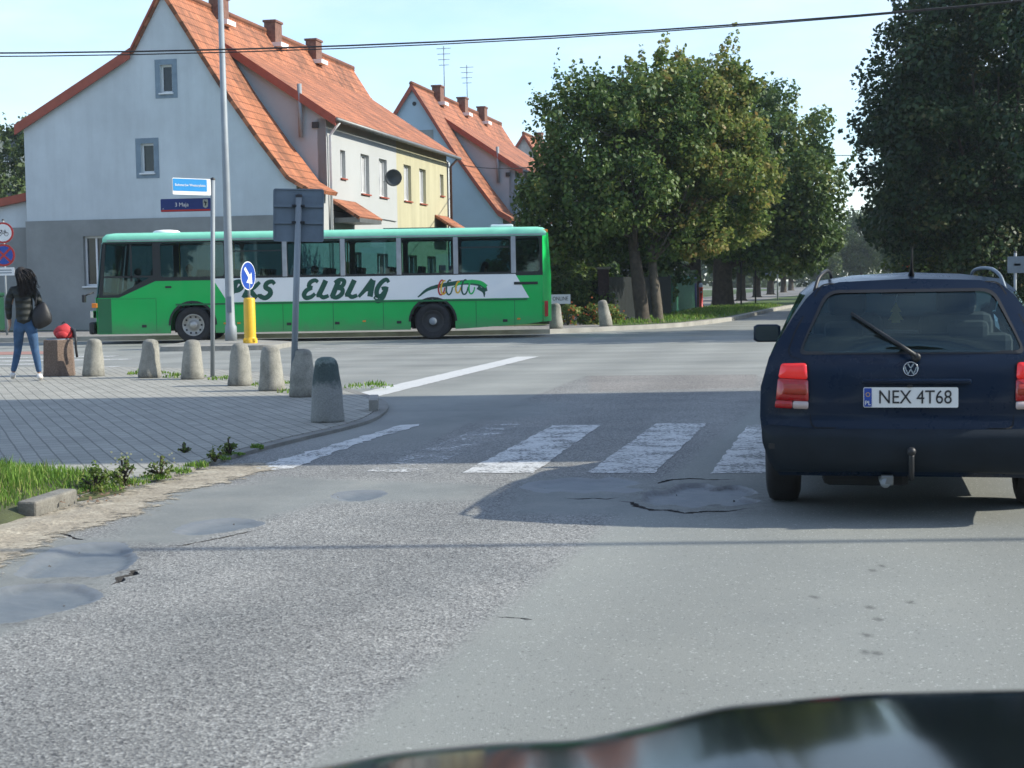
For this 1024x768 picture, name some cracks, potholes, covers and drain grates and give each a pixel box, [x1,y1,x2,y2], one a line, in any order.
pothole [13,542,140,578]
pothole [330,490,389,502]
pothole [641,483,761,508]
pothole [172,518,265,535]
pothole [0,583,104,624]
crack [111,568,145,585]
